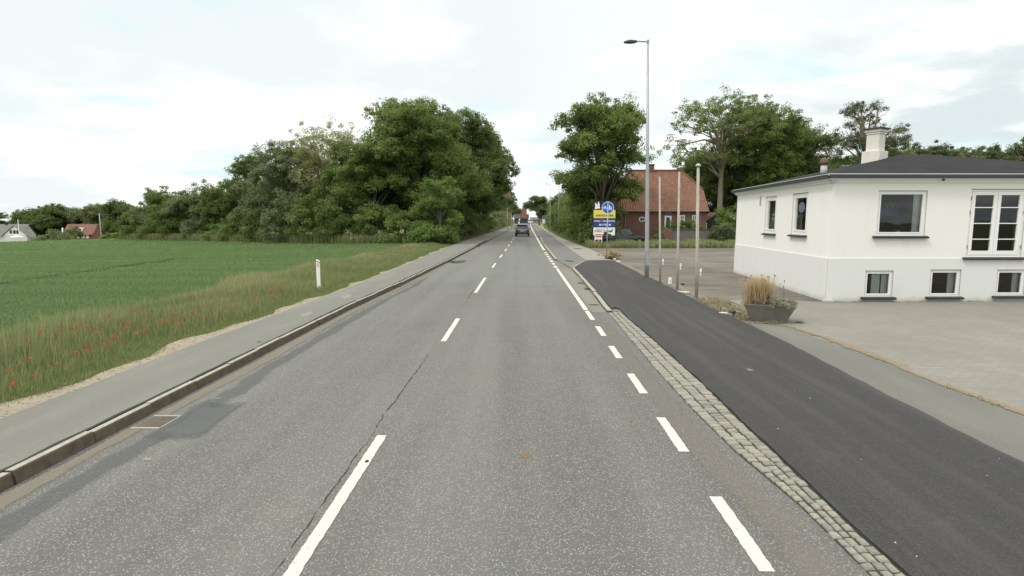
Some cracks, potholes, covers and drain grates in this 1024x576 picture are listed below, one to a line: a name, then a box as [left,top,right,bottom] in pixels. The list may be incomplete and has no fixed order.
crack [271,354,428,576]
drain grate [130,415,181,430]
